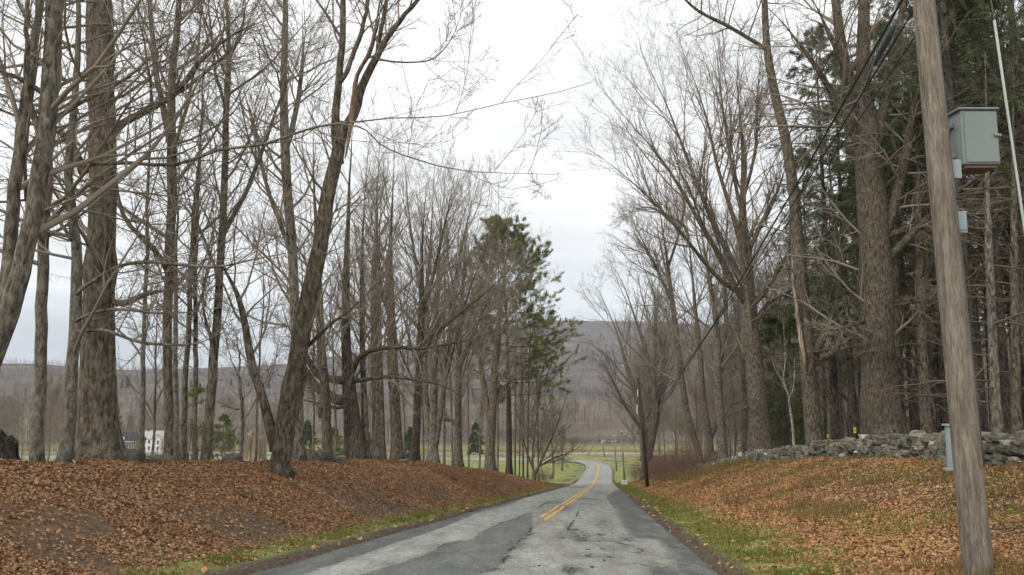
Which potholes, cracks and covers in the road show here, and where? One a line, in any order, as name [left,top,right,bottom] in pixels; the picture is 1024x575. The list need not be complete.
crack [489,487,670,567]
